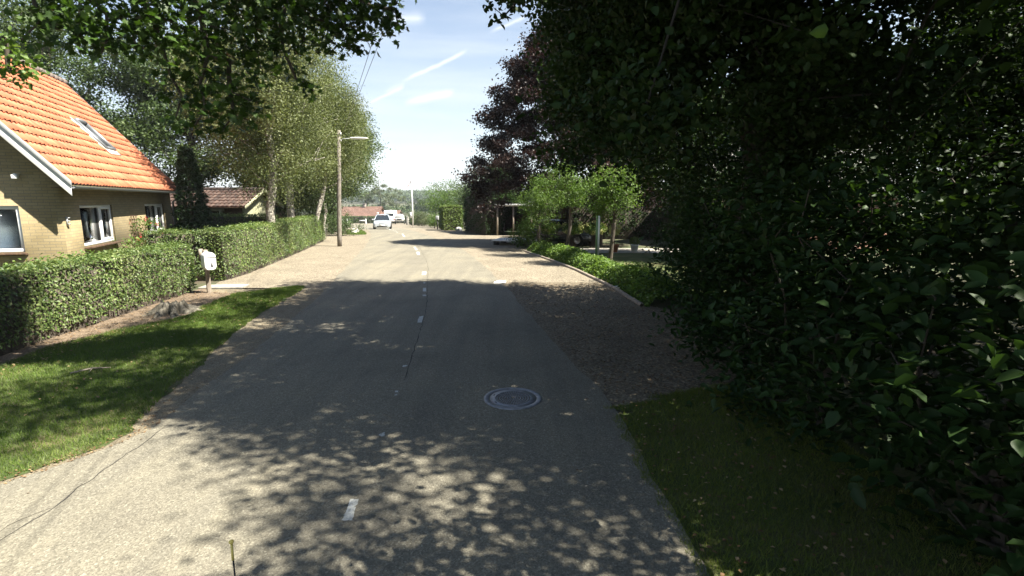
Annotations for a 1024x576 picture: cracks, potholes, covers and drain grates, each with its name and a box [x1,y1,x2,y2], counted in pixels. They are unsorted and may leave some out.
manhole cover [484,387,542,410]
crack [1,427,164,540]
crack [404,241,429,380]
